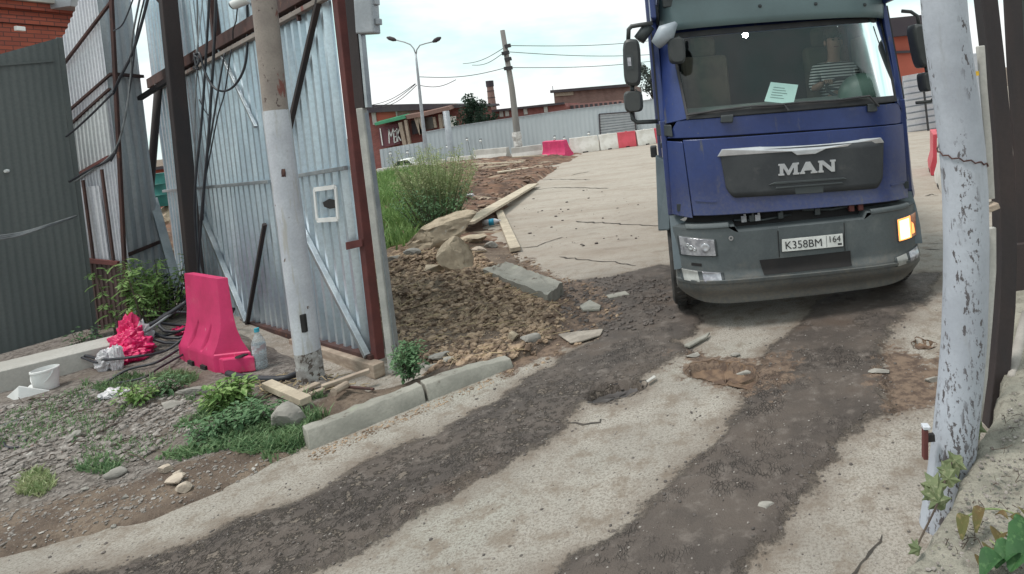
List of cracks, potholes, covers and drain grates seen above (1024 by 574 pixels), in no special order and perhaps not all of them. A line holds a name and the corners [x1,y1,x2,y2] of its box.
crack [852,535,882,574]
crack [520,221,658,266]
pothole [588,379,647,404]
pothole [683,359,760,390]
crack [534,172,590,190]
